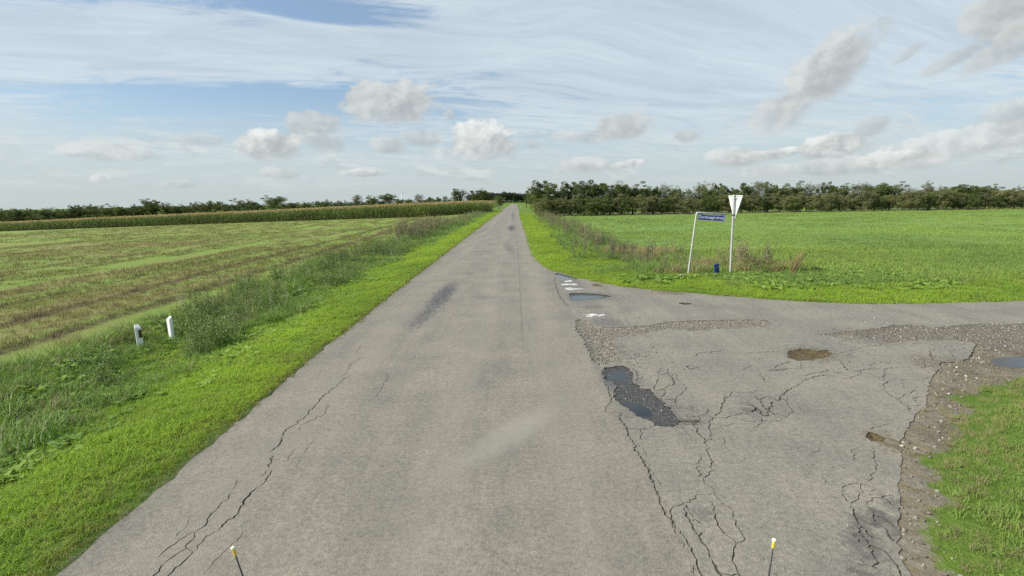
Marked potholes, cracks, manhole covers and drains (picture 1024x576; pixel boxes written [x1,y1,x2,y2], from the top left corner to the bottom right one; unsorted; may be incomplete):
crack [604,344,963,576]
pothole [866,432,886,442]
pothole [601,366,680,427]
crack [153,348,364,576]
pothole [569,293,612,301]
pothole [787,348,834,361]
